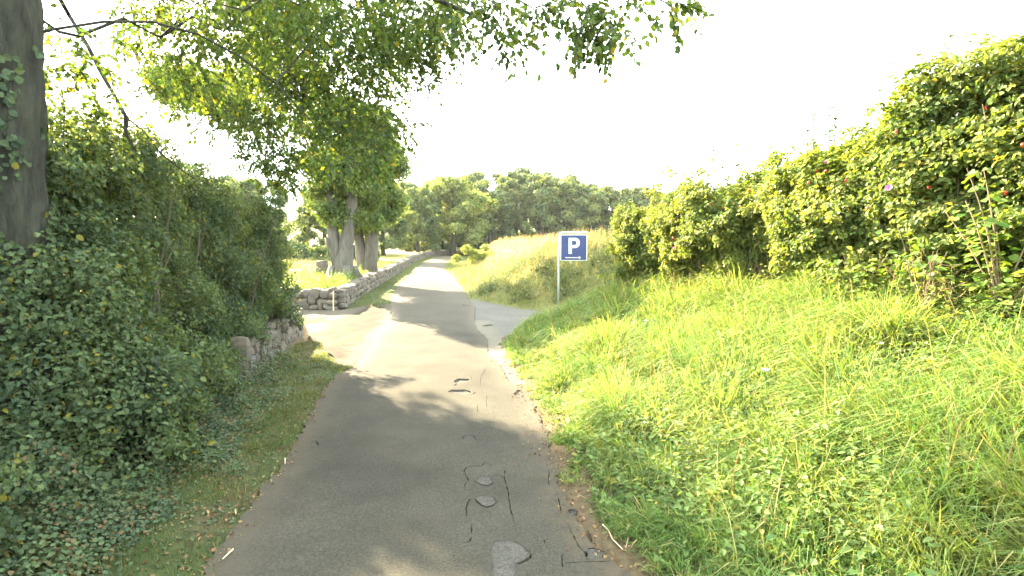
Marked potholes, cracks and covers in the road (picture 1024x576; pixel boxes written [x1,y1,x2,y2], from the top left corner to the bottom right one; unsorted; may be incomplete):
pothole [585,548,603,559]
pothole [476,495,498,508]
pothole [475,476,493,486]
crack [544,470,605,568]
crack [463,463,514,543]
pothole [490,540,532,576]
